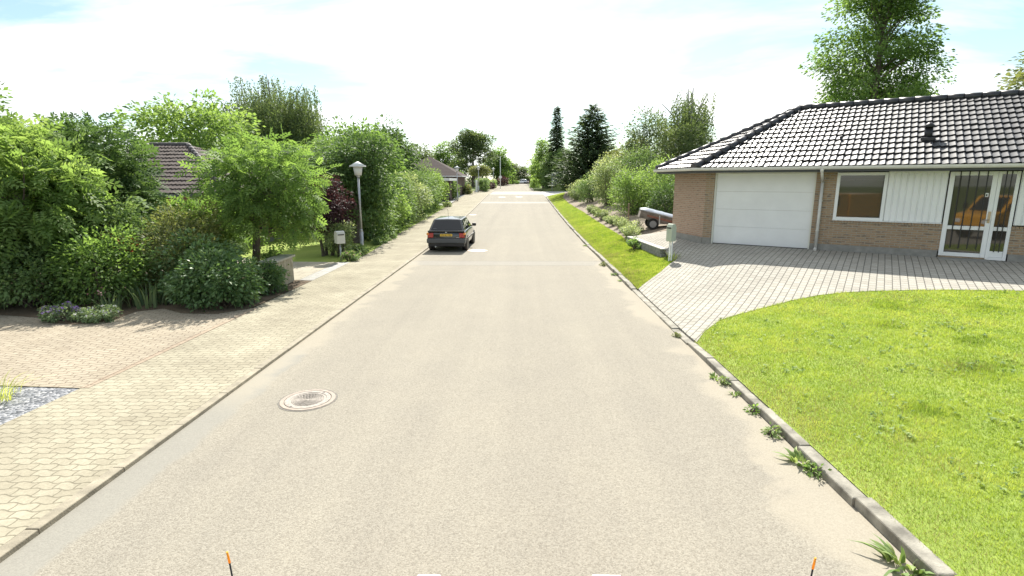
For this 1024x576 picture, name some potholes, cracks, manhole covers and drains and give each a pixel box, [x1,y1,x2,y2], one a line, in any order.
manhole cover [277,389,338,412]
